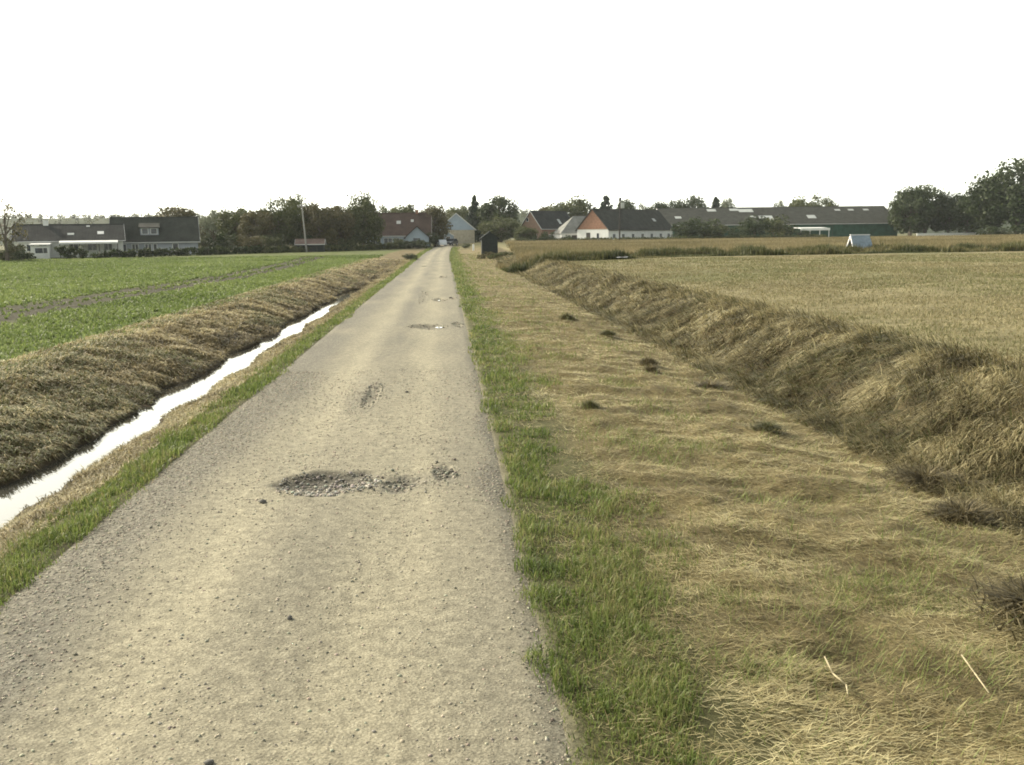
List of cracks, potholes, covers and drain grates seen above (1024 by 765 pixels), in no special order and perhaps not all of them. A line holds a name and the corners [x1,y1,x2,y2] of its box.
pothole [373,469,428,497]
pothole [427,458,461,486]
pothole [401,323,452,331]
pothole [256,468,397,501]
